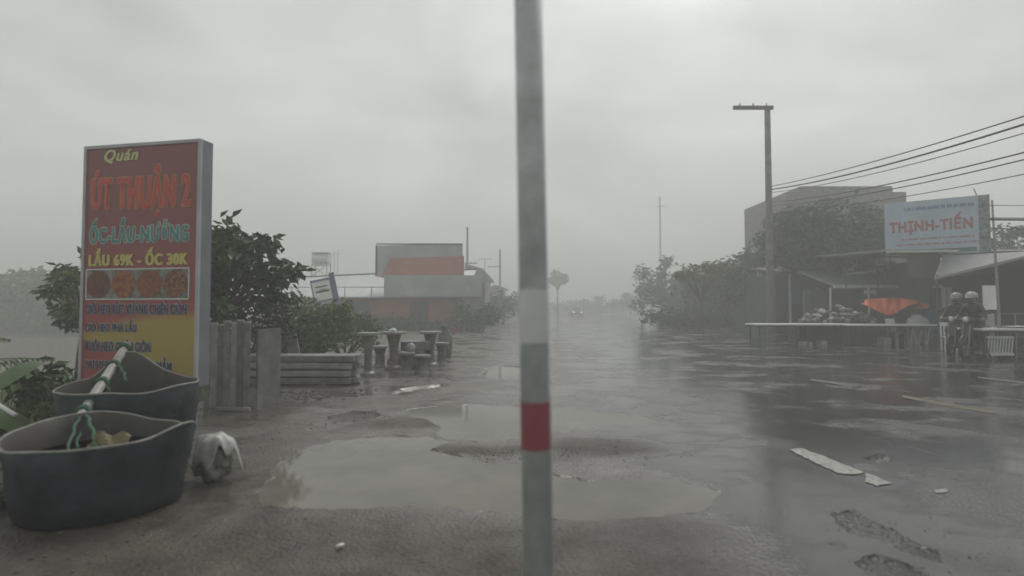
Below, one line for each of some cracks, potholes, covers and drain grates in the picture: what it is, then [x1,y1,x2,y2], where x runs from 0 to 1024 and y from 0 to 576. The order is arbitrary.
pothole [830,509,943,563]
pothole [853,553,927,576]
pothole [326,411,381,423]
pothole [863,454,893,464]
pothole [258,435,721,521]
